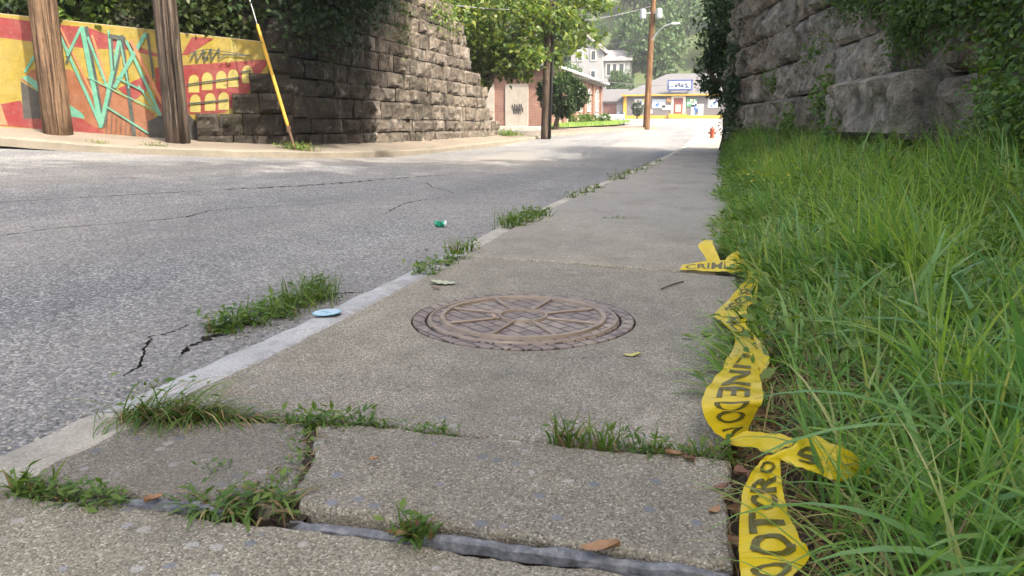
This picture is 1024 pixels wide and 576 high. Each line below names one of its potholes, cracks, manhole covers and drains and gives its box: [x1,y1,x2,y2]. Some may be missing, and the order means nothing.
crack [123,292,362,376]
crack [6,171,499,211]
crack [7,202,353,235]
manhole cover [413,293,634,351]
